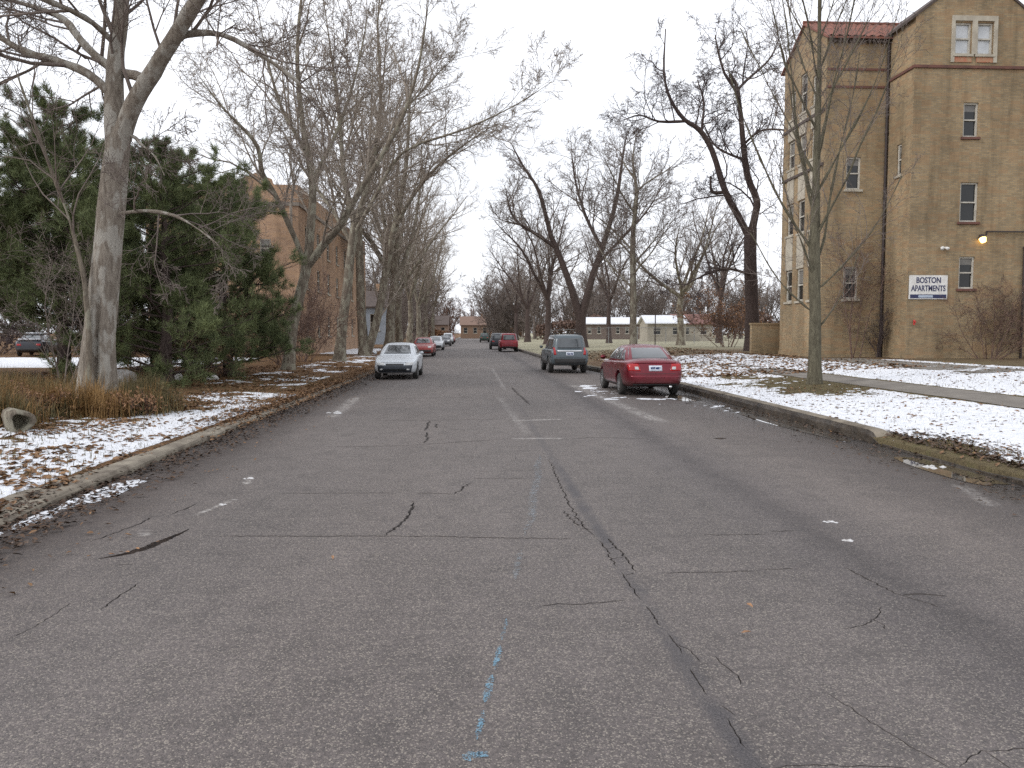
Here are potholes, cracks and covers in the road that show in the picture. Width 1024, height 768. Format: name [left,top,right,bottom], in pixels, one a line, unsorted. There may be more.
crack [394,387,530,421]
crack [777,692,1024,768]
crack [844,567,944,630]
crack [333,421,499,447]
crack [238,478,568,539]
